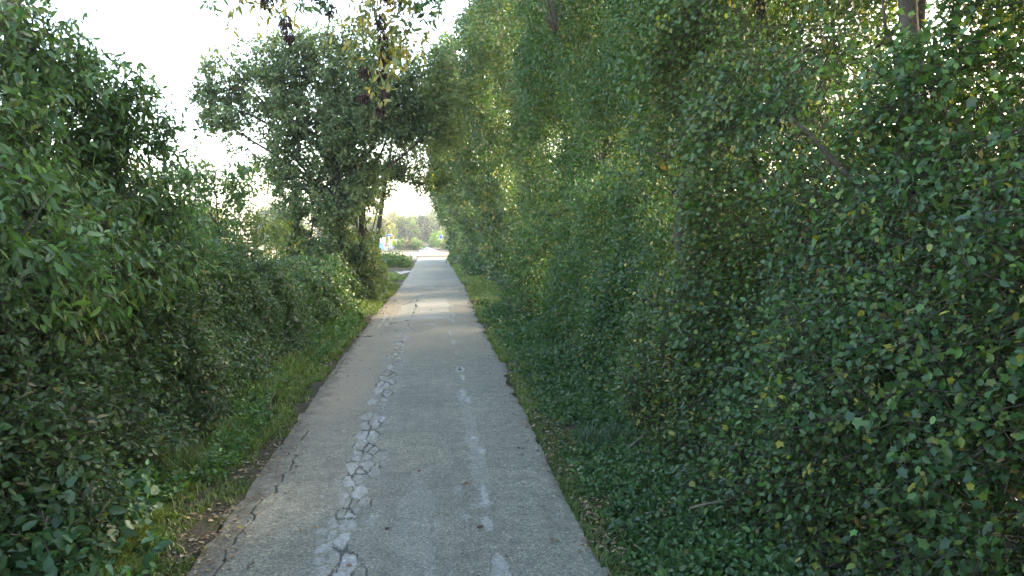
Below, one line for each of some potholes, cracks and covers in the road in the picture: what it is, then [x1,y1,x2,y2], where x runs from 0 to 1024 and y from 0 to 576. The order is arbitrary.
crack [213,433,307,576]
crack [328,299,418,576]
